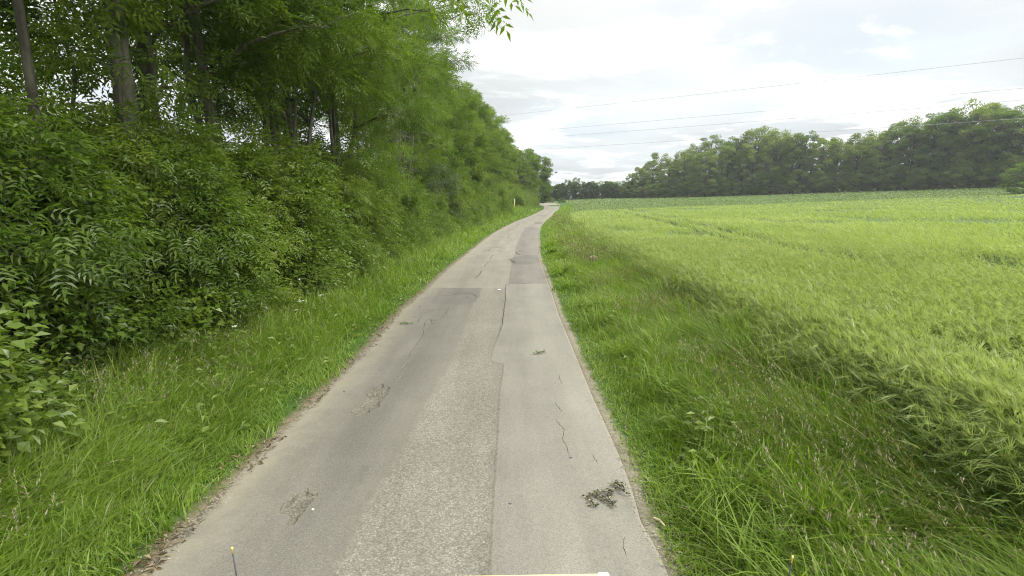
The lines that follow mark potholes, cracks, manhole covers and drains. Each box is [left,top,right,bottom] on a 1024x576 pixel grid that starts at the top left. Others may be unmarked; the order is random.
pothole [350,383,391,416]
crack [394,293,477,385]
pothole [278,488,318,528]
